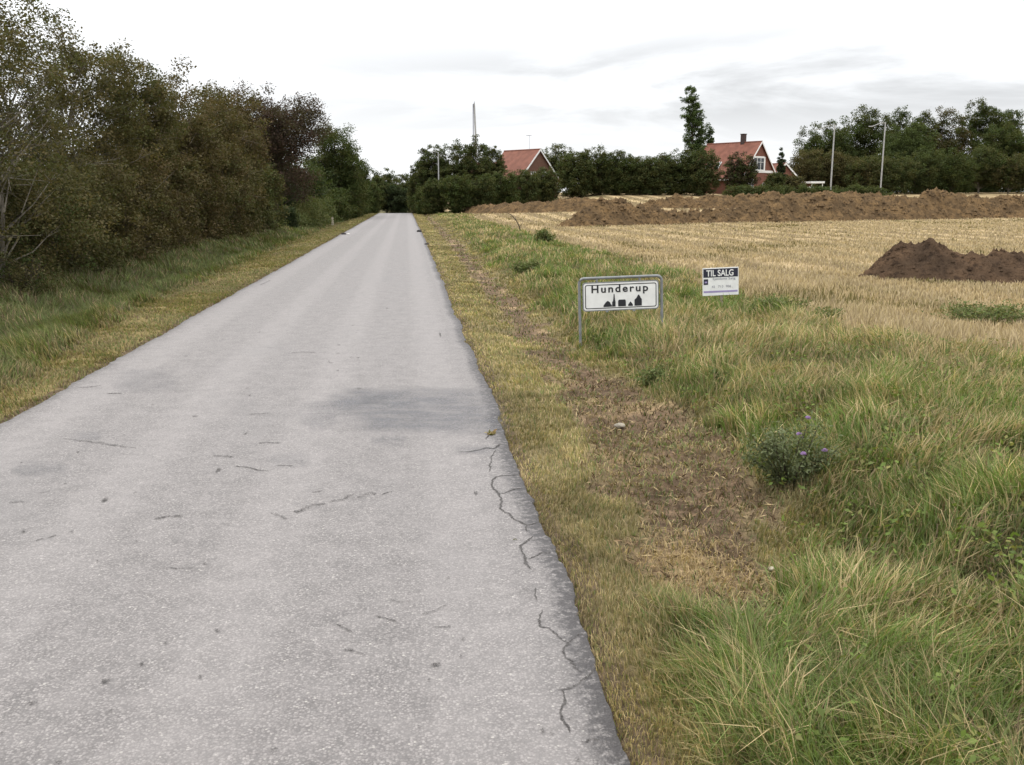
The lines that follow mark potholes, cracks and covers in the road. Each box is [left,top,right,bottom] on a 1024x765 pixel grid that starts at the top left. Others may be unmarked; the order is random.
crack [461,428,549,570]
crack [276,490,392,519]
crack [534,587,597,742]
